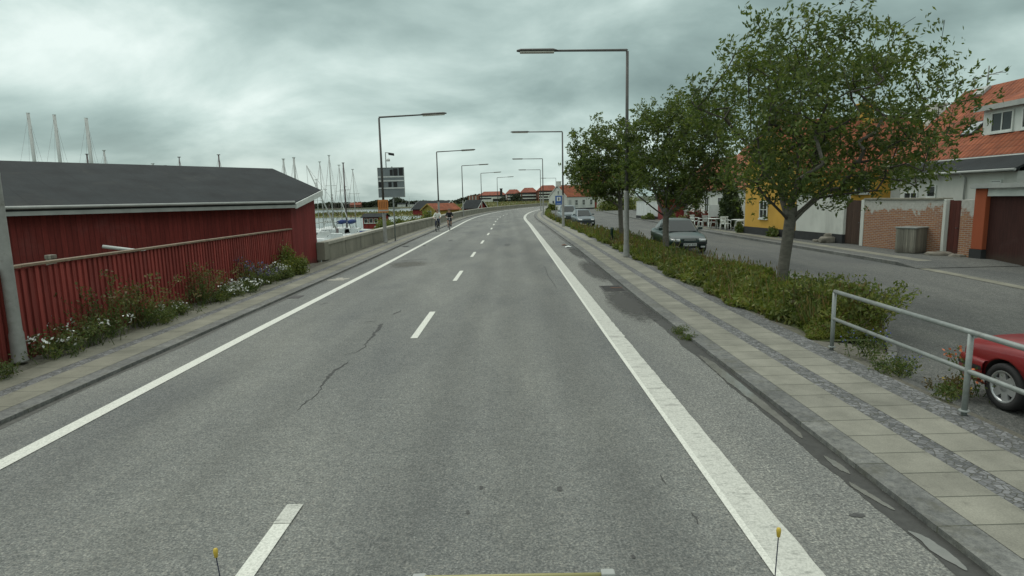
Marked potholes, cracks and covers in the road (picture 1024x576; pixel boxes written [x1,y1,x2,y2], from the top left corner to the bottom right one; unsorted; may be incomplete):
crack [297,311,400,410]
